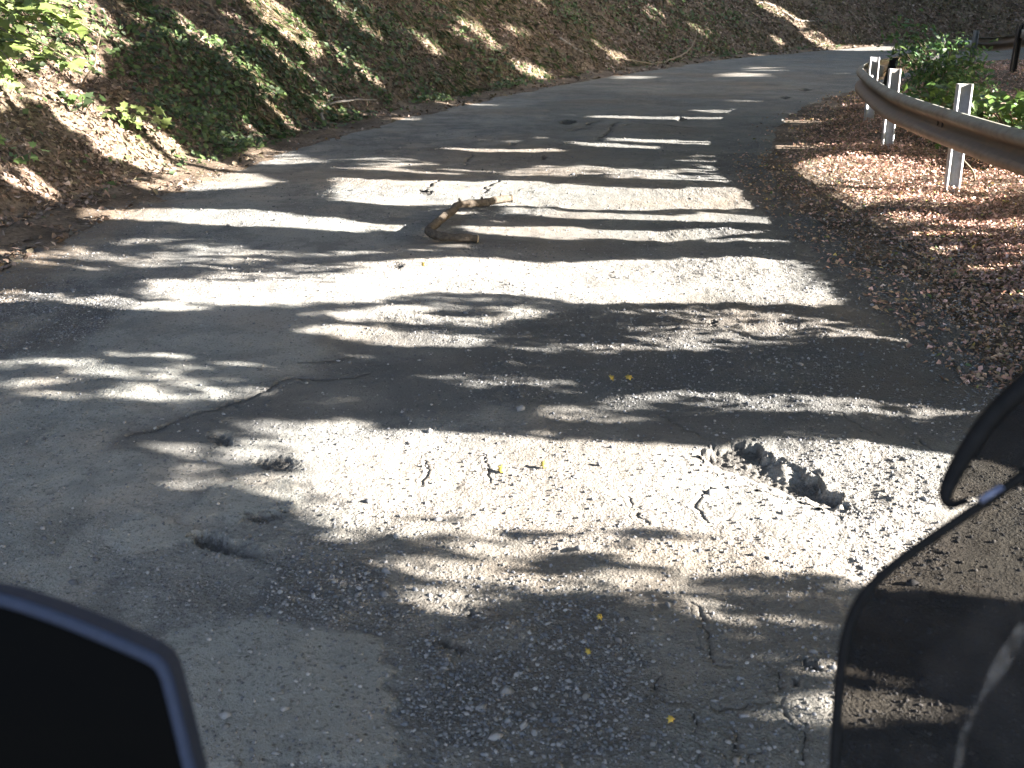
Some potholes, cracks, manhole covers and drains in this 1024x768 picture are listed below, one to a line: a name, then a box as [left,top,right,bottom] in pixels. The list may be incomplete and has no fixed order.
crack [642,601,817,768]
pothole [236,507,289,526]
crack [622,496,656,527]
pothole [174,529,267,561]
pothole [246,454,304,474]
crack [122,354,373,441]
pothole [207,432,236,451]
crack [687,485,716,523]
crack [415,459,435,487]
pothole [692,435,862,519]
crack [478,454,496,483]
